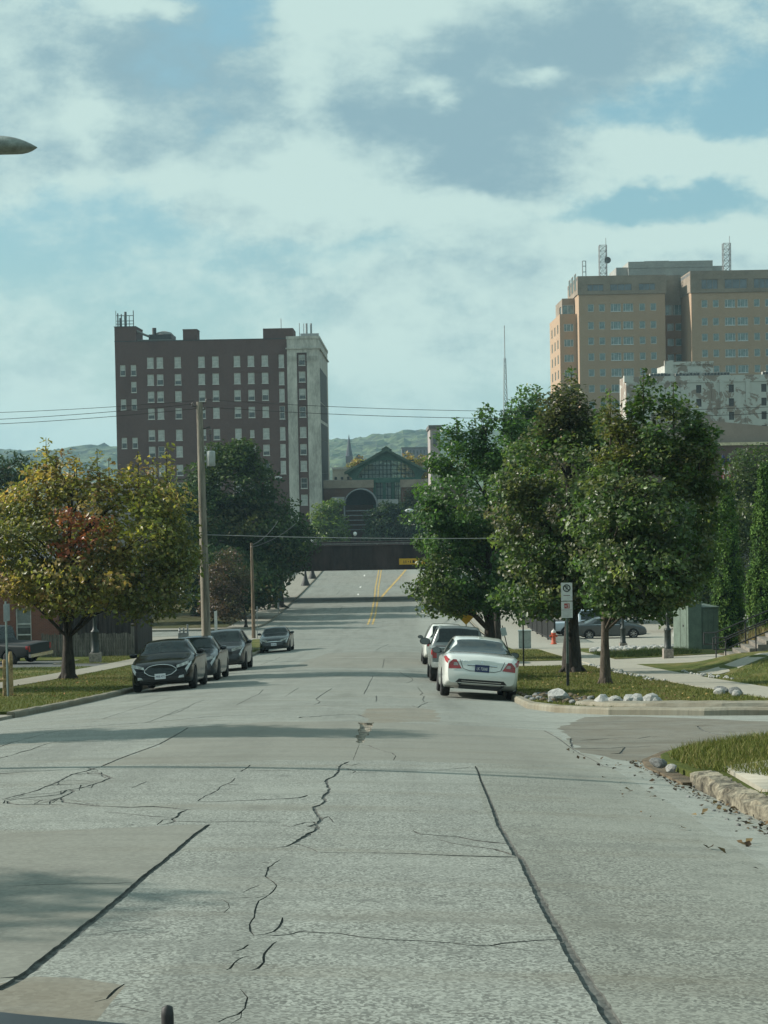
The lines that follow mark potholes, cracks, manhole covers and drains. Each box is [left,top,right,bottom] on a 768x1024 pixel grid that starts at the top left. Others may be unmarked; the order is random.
crack [570,736,652,754]
crack [211,990,248,1024]
crack [0,690,558,970]
pothole [354,723,373,743]
crack [286,644,428,718]
